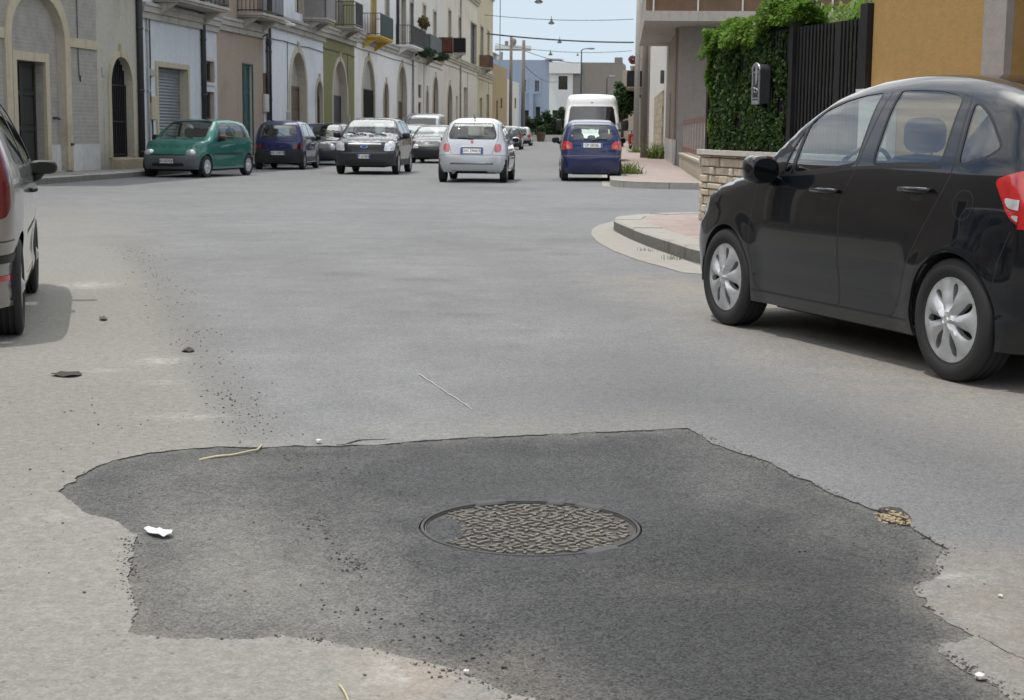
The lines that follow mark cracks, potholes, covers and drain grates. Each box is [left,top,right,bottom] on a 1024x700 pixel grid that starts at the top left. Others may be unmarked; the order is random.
manhole cover [420,499,641,557]
pothole [873,507,912,527]
